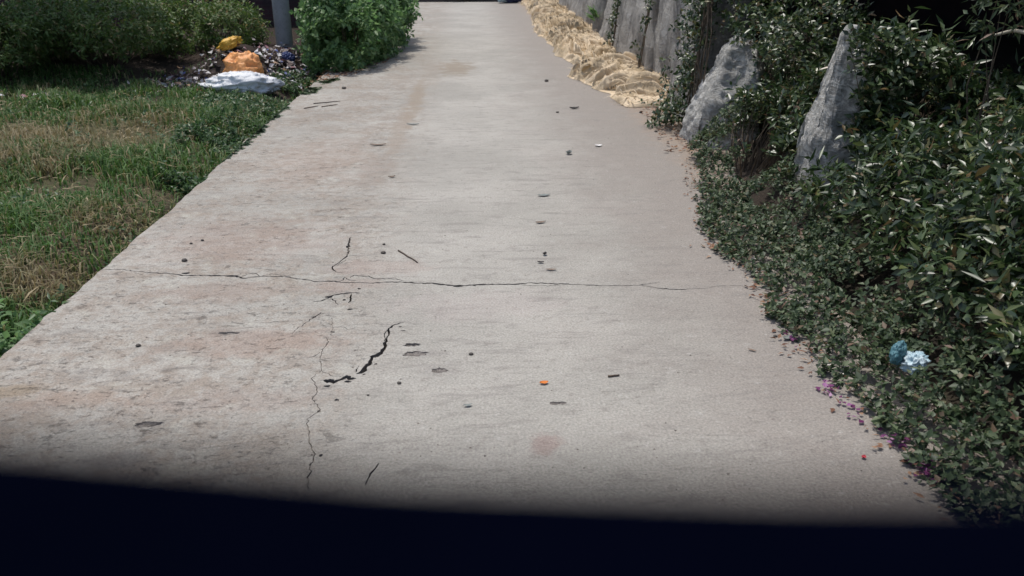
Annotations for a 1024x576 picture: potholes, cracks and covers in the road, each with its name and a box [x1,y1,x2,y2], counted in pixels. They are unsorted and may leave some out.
crack [332,237,354,272]
crack [290,288,405,458]
